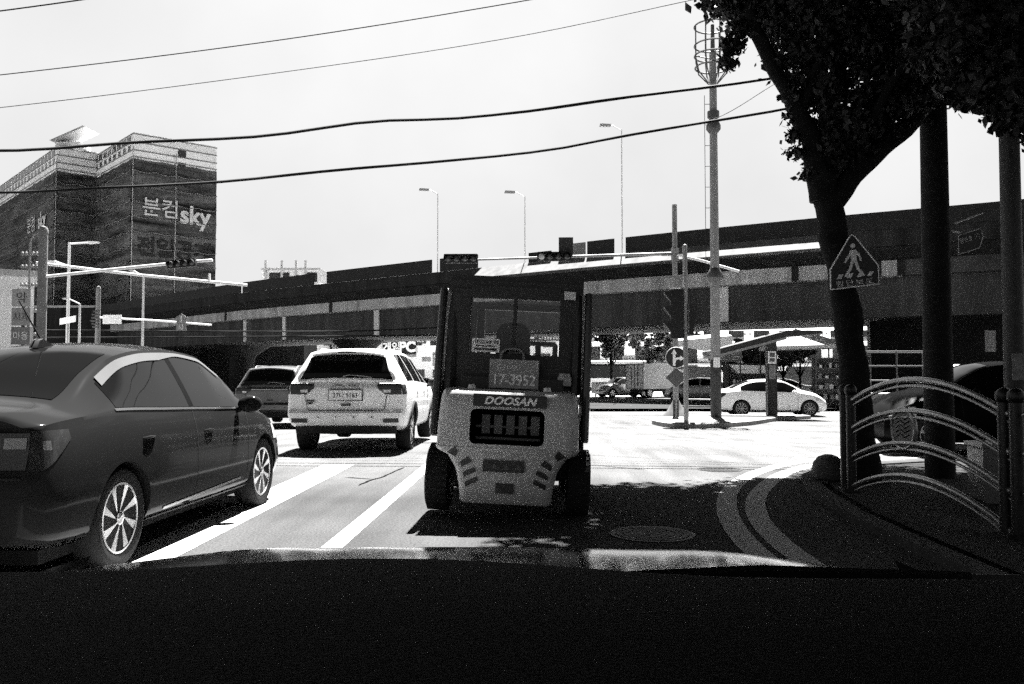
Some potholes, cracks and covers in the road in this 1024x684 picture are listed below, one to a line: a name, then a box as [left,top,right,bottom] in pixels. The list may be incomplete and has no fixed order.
crack [348,467,404,485]
manhole cover [610,526,695,543]
